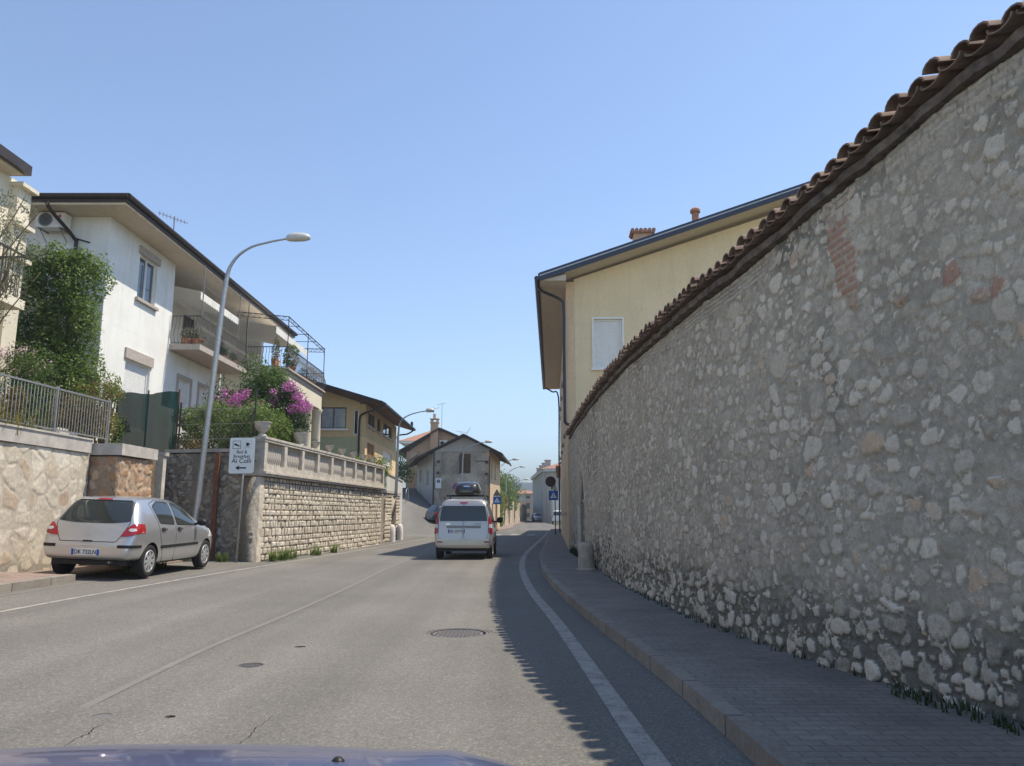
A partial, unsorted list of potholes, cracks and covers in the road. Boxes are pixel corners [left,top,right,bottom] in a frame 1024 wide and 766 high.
manhole cover [427,629,489,638]
